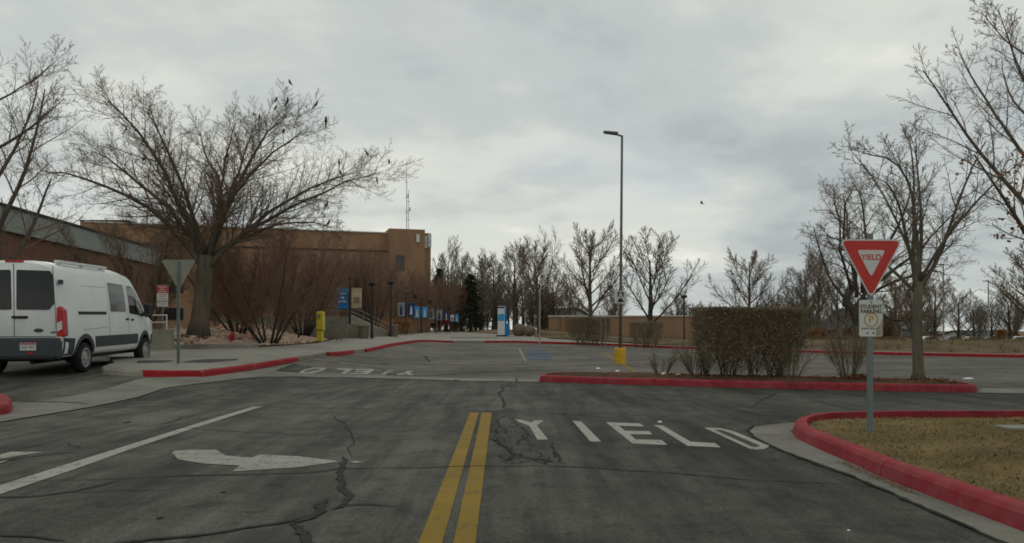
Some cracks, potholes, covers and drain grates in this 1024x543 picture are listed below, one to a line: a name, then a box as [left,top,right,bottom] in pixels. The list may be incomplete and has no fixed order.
crack [2,383,881,497]
